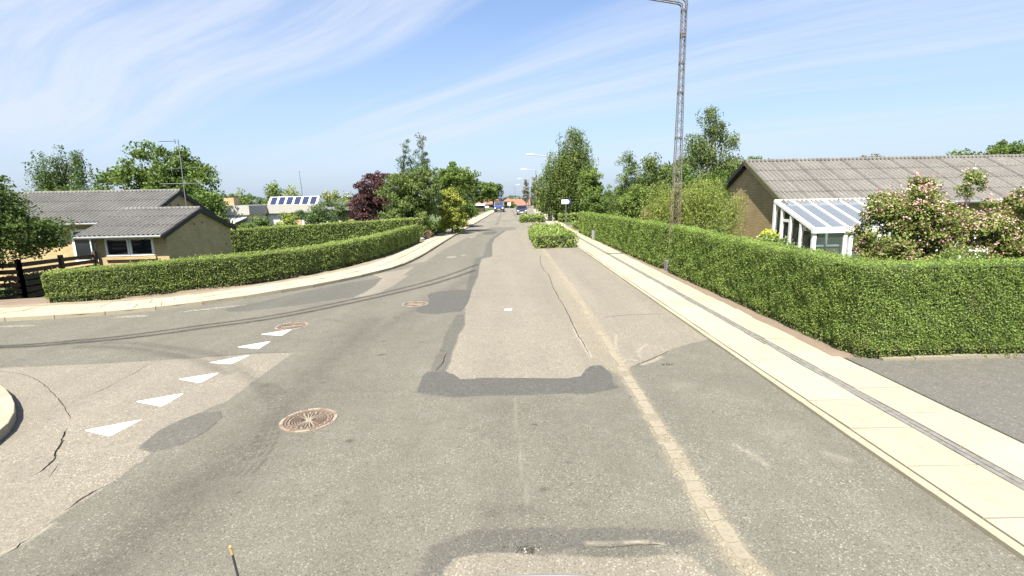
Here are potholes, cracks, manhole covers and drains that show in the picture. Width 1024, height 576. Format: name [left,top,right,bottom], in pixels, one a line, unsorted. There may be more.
manhole cover [274,322,309,330]
crack [0,371,107,556]
manhole cover [279,408,338,433]
crack [540,257,589,354]
